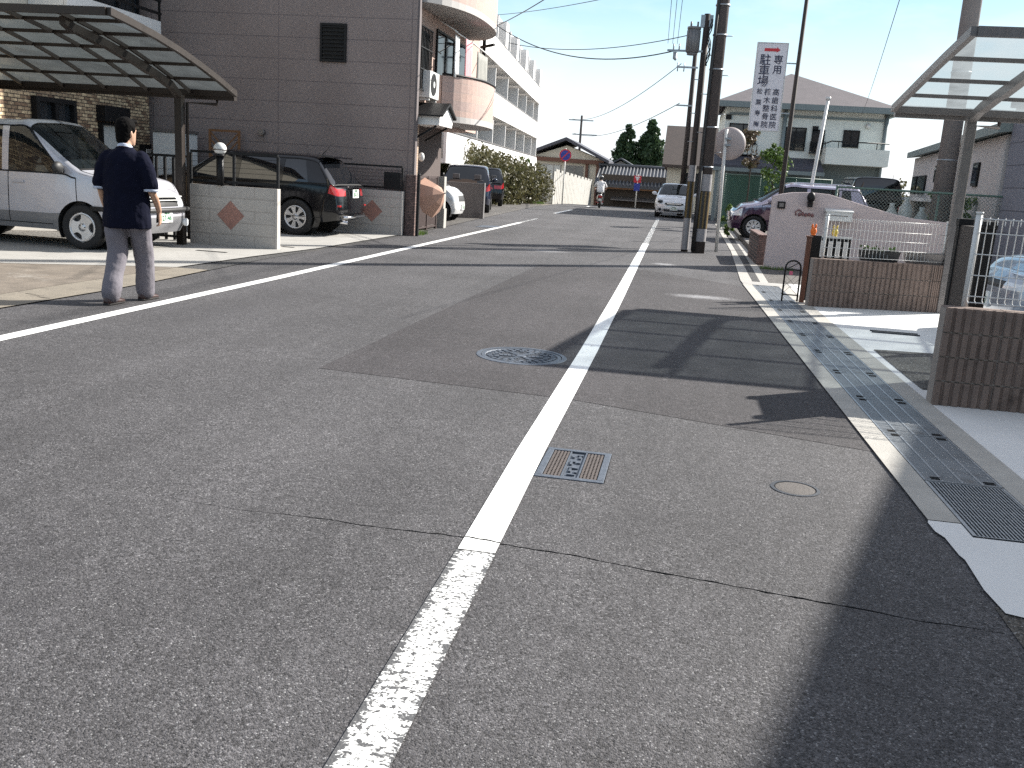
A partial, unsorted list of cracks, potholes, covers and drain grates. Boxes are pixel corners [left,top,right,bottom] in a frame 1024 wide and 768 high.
drain grate [851,397,947,438]
drain grate [925,480,1024,542]
drain grate [766,300,806,312]
drain grate [774,309,819,324]
drain grate [759,292,795,302]
drain grate [810,350,877,375]
drain grate [784,321,834,337]
manhole cover [770,480,821,497]
manhole cover [476,347,567,365]
drain grate [828,371,907,402]
drain grate [796,334,853,354]
